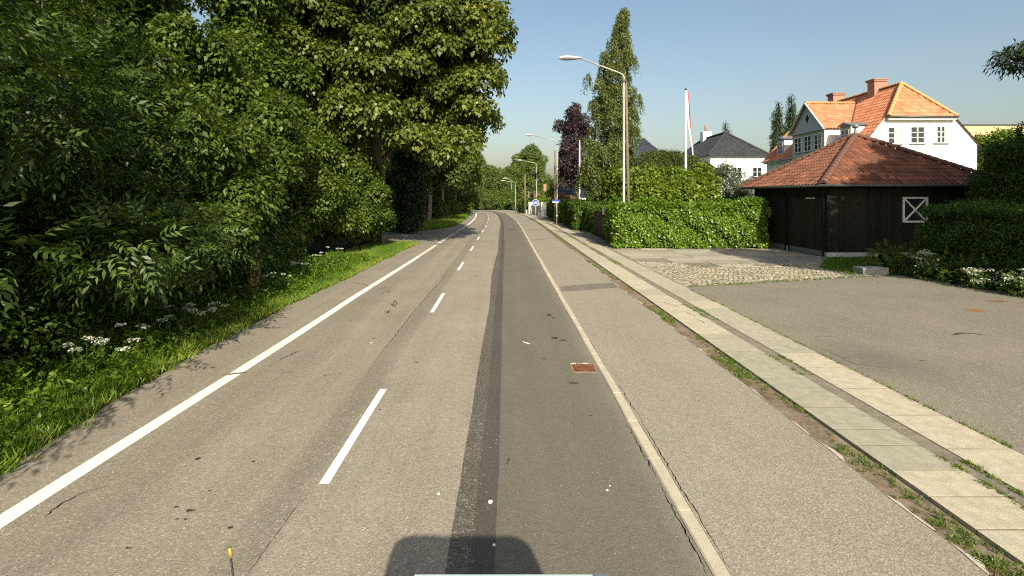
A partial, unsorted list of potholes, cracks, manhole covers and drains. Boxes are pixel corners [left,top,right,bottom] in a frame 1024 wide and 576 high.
crack [45,486,105,517]
drain grate [569,363,598,373]
